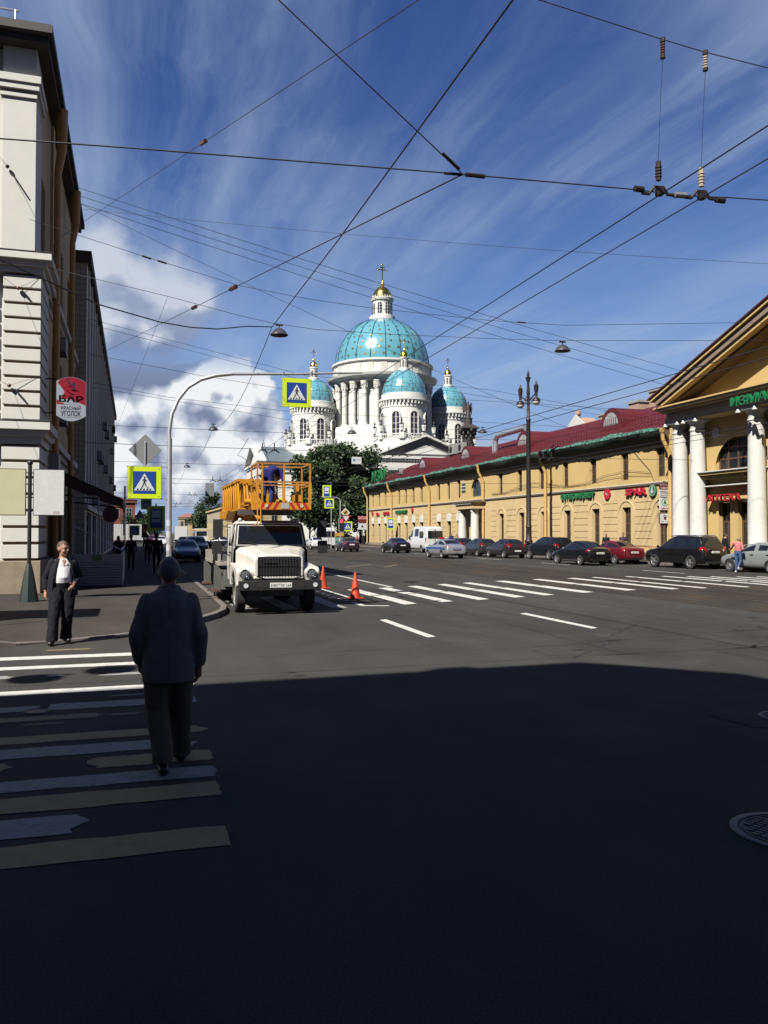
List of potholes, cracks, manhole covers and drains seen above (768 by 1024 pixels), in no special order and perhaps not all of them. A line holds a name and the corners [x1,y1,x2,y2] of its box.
manhole cover [729,812,768,847]
